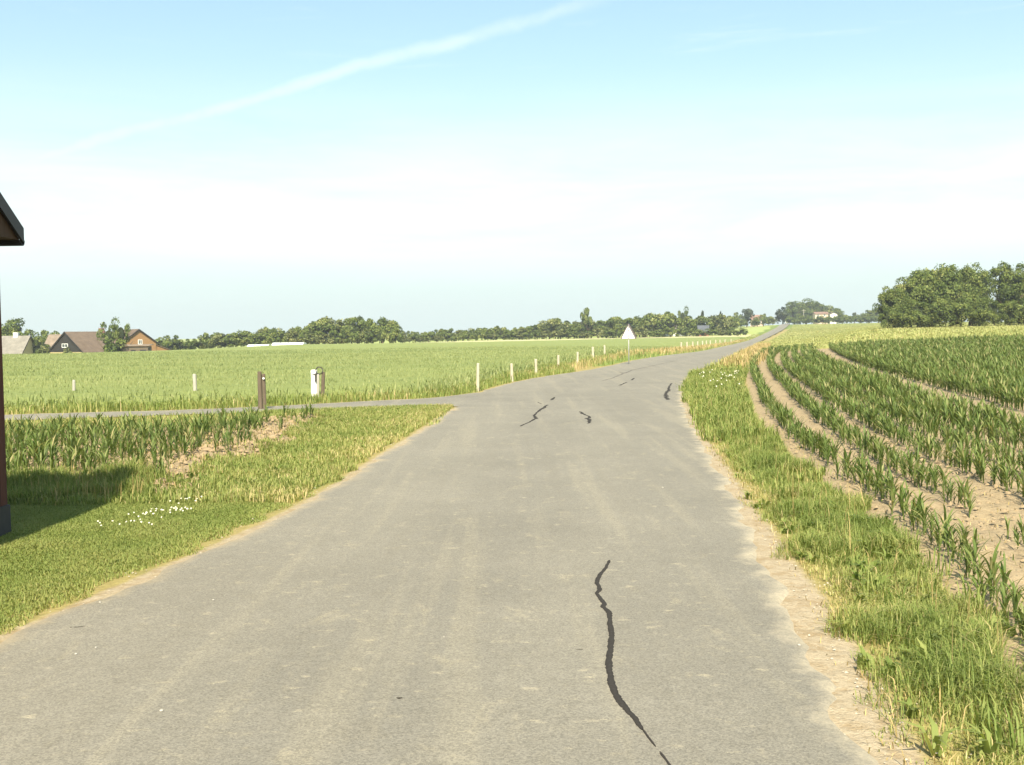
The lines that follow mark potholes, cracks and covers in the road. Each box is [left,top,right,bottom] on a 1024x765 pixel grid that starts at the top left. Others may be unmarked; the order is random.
crack [520,397,555,426]
crack [603,362,672,400]
